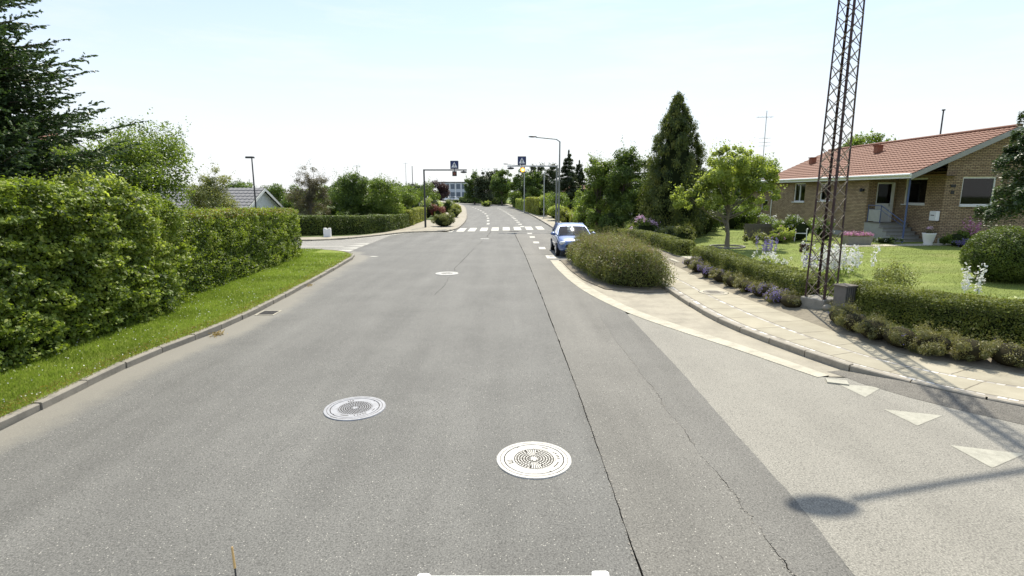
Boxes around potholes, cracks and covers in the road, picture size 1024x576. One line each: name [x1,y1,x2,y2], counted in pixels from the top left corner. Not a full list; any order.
crack [617,343,798,576]
manhole cover [496,441,572,480]
manhole cover [323,396,386,421]
crack [514,233,644,576]
